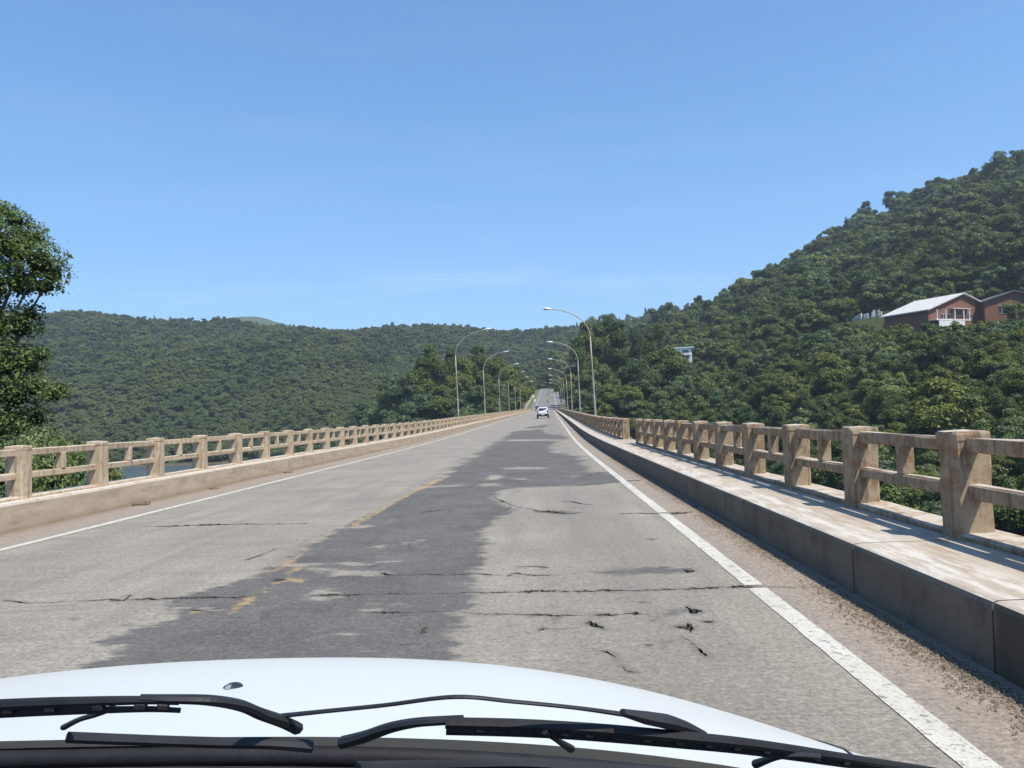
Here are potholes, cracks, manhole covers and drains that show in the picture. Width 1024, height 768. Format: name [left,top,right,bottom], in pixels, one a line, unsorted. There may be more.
crack [494,497,590,514]
crack [320,566,836,632]
